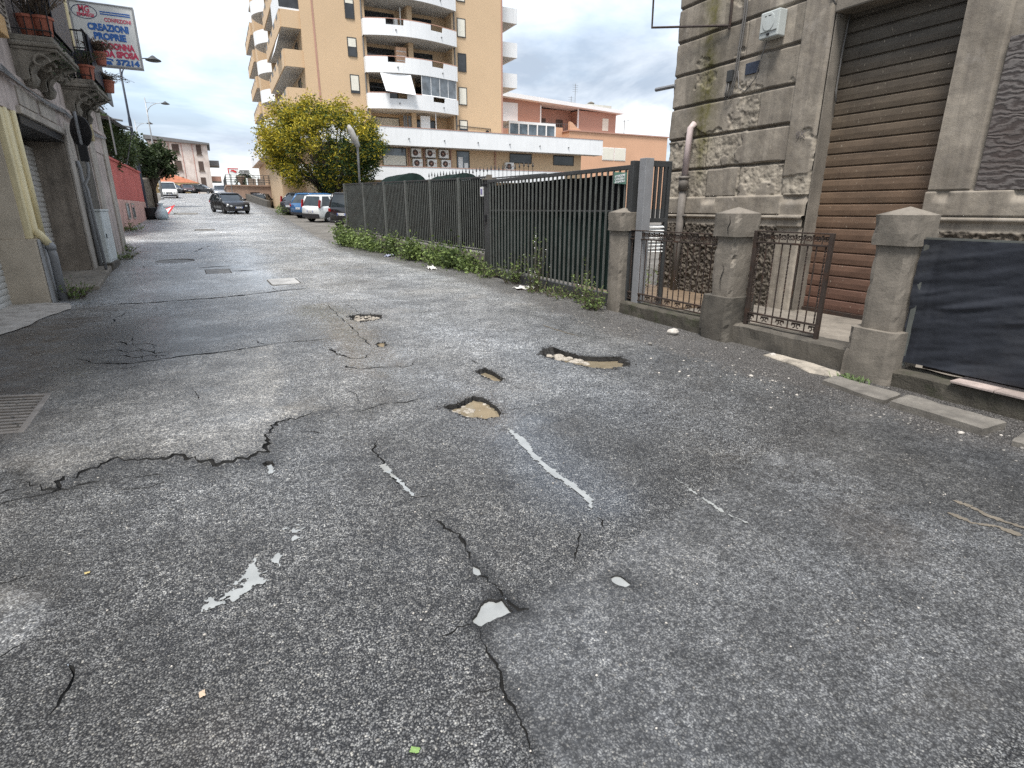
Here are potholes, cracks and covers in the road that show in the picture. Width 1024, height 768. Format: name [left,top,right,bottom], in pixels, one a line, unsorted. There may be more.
crack [0,412,328,505]
manhole cover [267,278,301,286]
crack [442,624,532,754]
crack [80,303,413,369]
pothole [536,345,637,370]
pothole [437,395,504,420]
crack [434,520,530,612]
drain grate [0,393,52,434]
crack [50,664,75,714]
pothole [346,313,382,322]
pothole [475,368,505,382]
